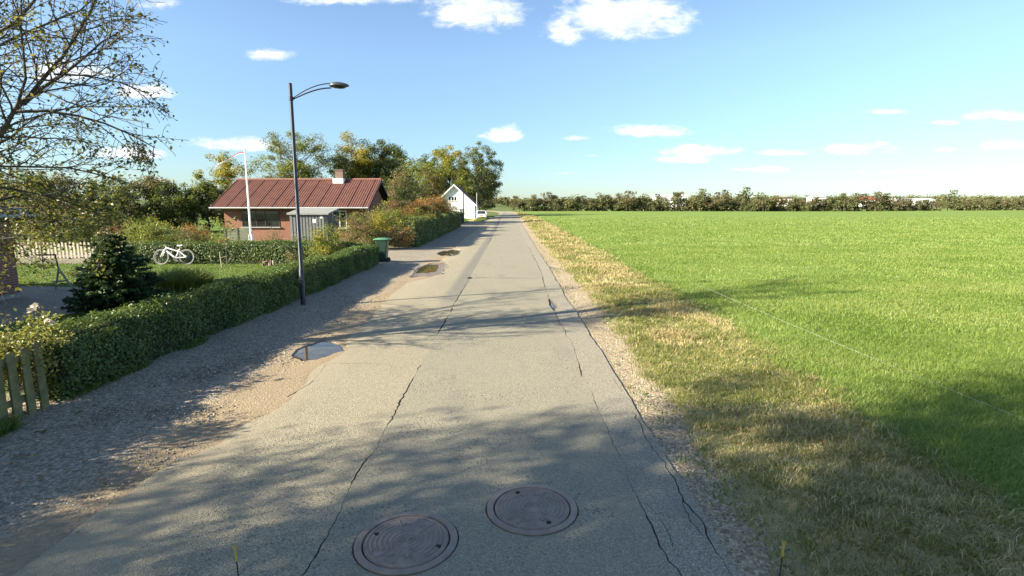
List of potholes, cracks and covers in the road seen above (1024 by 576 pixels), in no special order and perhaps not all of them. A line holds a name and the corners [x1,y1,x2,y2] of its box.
crack [287,363,421,576]
manhole cover [487,484,578,536]
manhole cover [353,511,458,576]
pothole [291,340,346,361]
crack [556,315,732,576]
